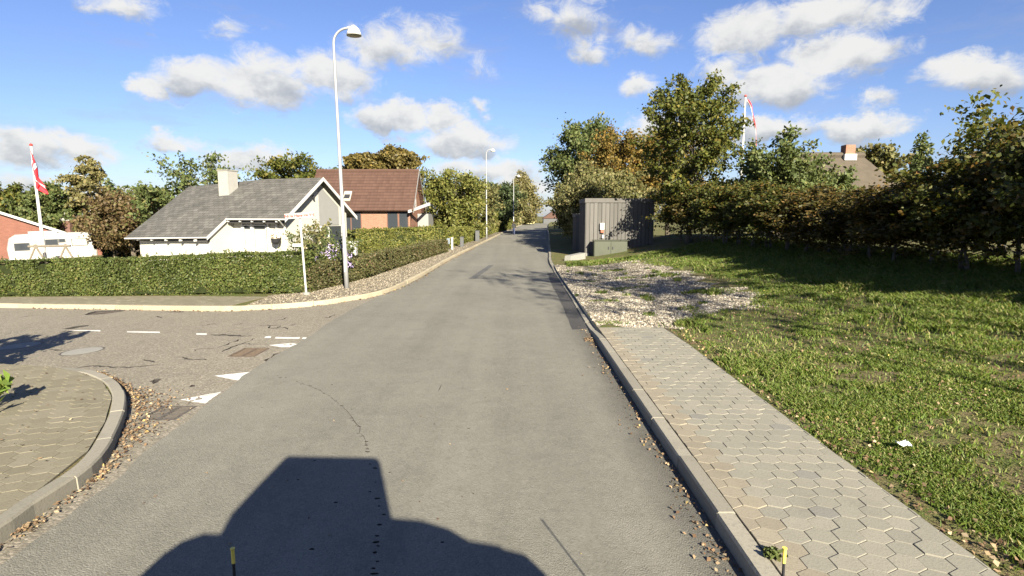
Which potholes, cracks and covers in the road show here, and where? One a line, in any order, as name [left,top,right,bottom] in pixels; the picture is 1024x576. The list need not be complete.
crack [182,318,295,360]
manhole cover [58,347,105,356]
crack [279,377,386,575]
